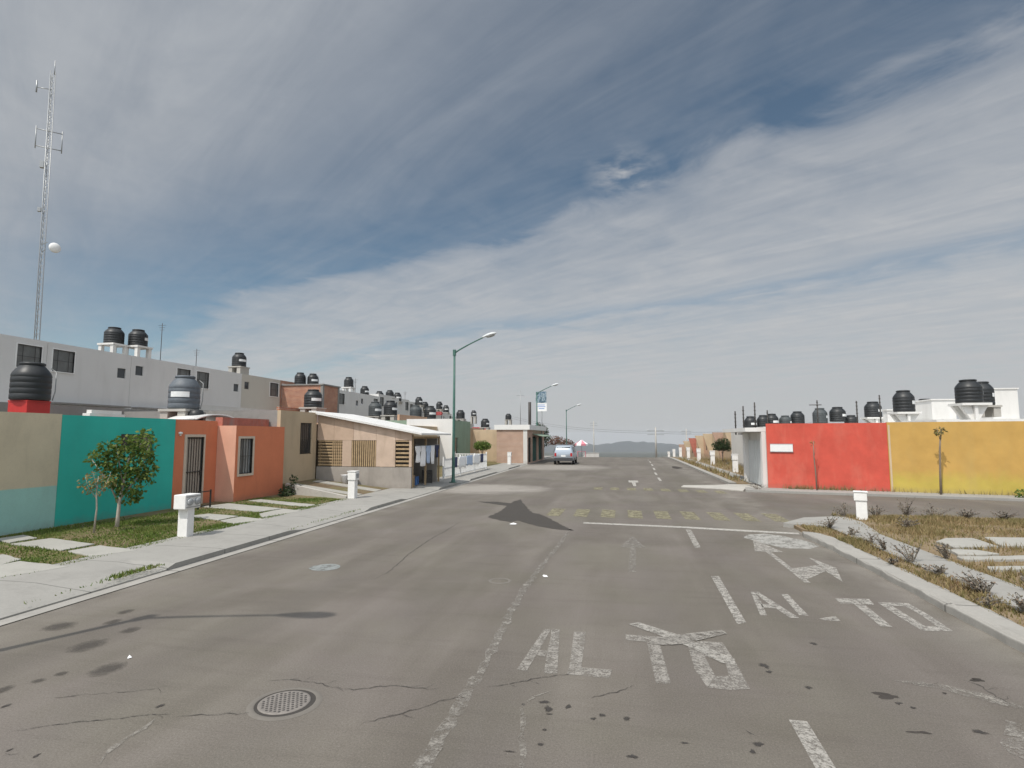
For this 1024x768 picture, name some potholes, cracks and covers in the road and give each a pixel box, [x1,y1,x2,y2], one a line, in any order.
crack [14,710,242,731]
manhole cover [246,687,323,721]
crack [271,677,465,721]
